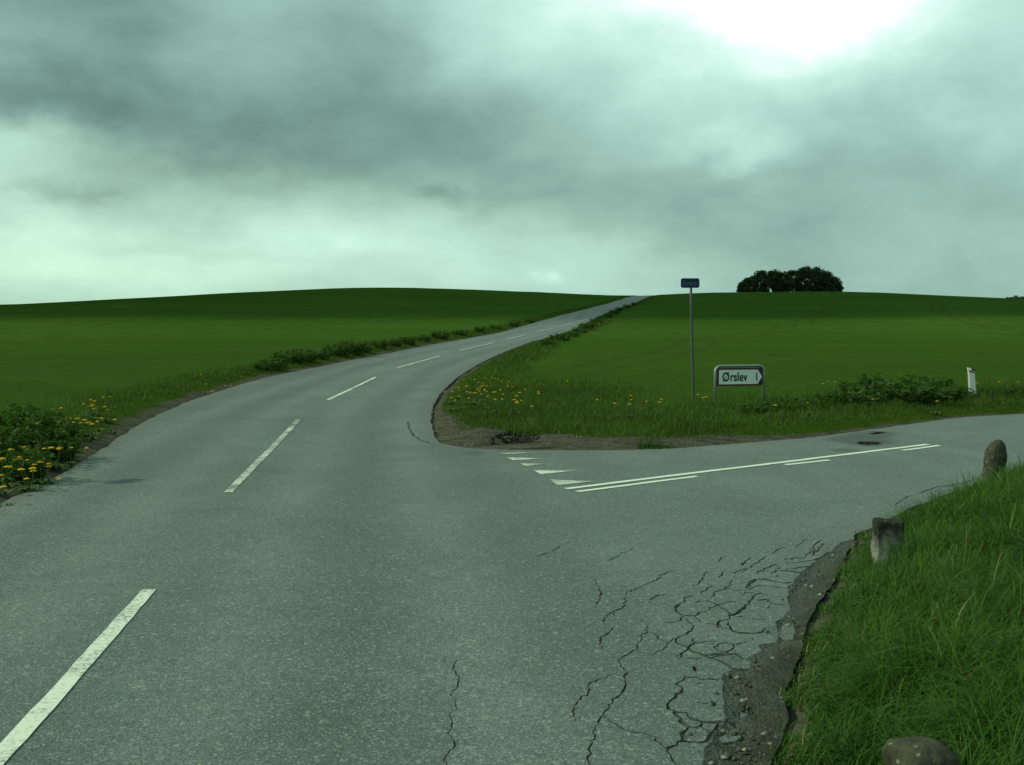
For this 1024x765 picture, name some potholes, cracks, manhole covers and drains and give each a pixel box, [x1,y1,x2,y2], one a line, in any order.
crack [433,656,461,765]
crack [572,539,829,765]
